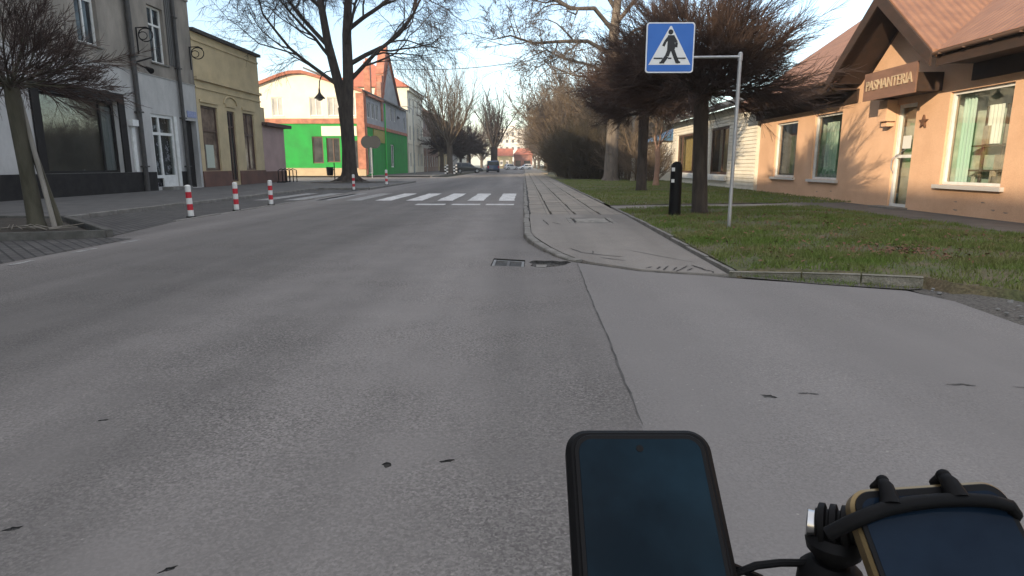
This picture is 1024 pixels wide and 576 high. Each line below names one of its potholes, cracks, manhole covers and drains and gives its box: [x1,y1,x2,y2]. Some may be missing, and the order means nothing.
pothole [529,260,571,268]
drain grate [491,258,525,267]
